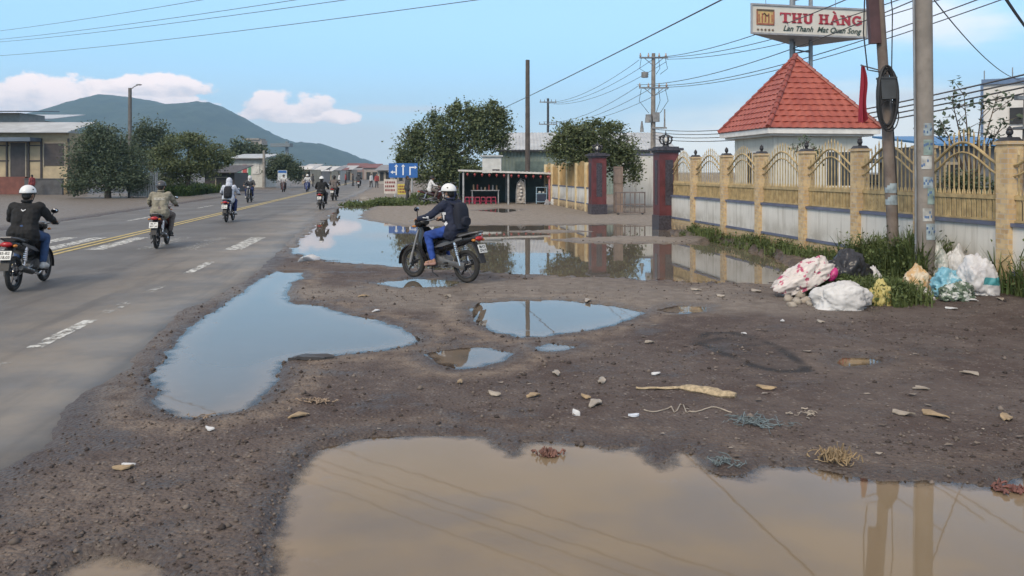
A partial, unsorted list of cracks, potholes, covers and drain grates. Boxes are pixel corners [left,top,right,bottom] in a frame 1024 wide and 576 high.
pothole [462,297,649,338]
pothole [415,344,521,371]
pothole [288,199,793,284]
pothole [138,270,429,420]
pothole [524,339,584,353]
pothole [372,277,462,288]
pothole [249,427,1024,576]
